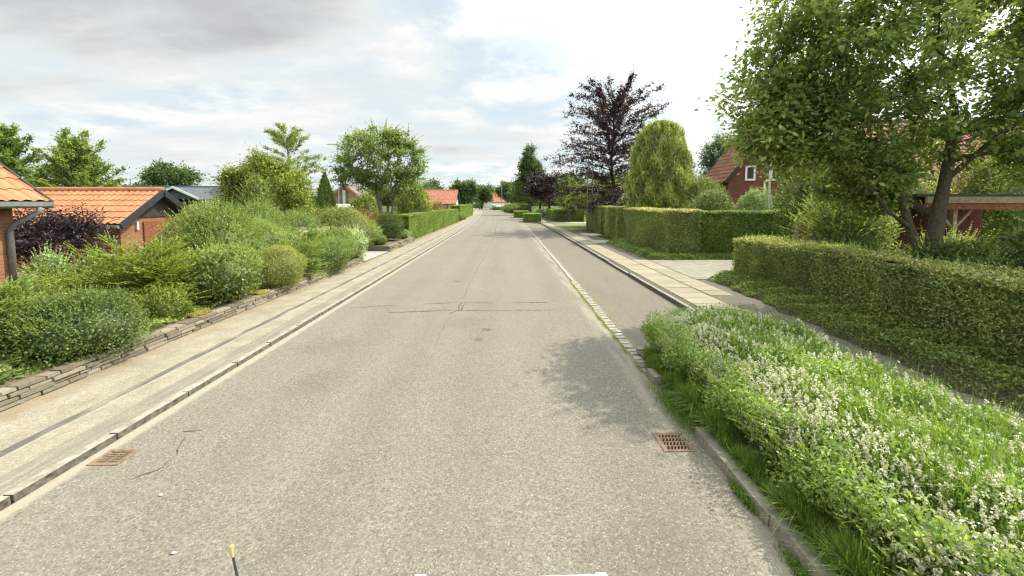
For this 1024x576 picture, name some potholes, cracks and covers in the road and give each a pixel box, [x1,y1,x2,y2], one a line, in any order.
drain grate [652,432,697,452]
crack [132,430,197,479]
drain grate [86,449,141,466]
